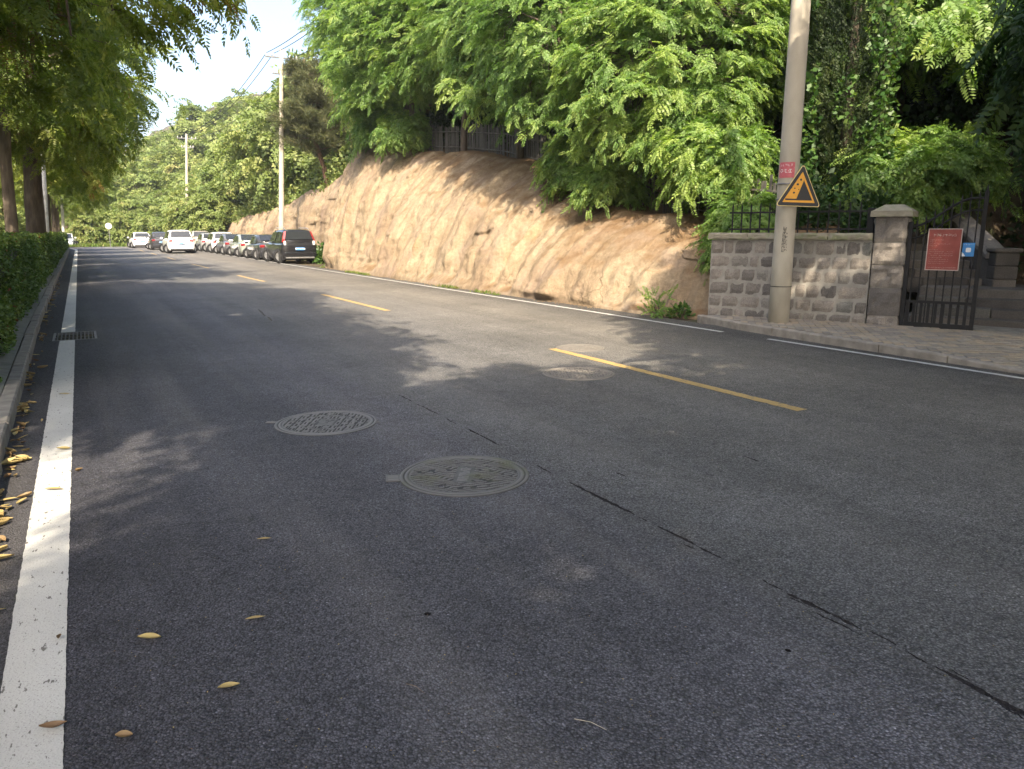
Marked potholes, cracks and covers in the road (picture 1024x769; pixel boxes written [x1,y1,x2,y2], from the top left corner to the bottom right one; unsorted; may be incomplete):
manhole cover [542,367,615,381]
manhole cover [556,344,605,352]
manhole cover [266,410,380,436]
drain grate [52,331,97,341]
manhole cover [386,455,529,497]
crack [399,395,1024,719]
